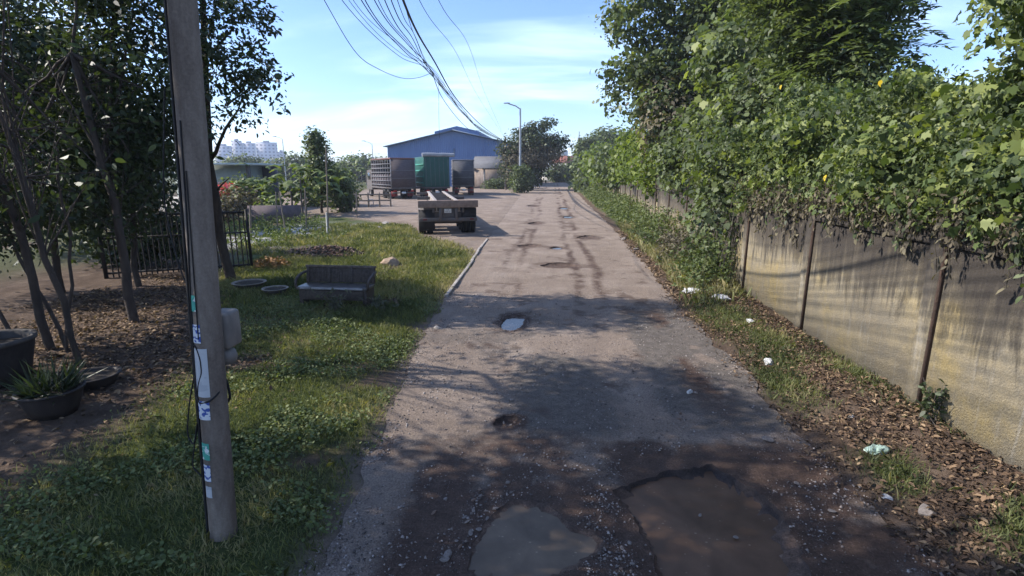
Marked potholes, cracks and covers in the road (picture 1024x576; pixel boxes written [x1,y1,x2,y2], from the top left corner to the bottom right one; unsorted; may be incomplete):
pothole [493,415,521,429]
pothole [613,464,812,576]
pothole [467,498,604,576]
pothole [500,314,527,331]
